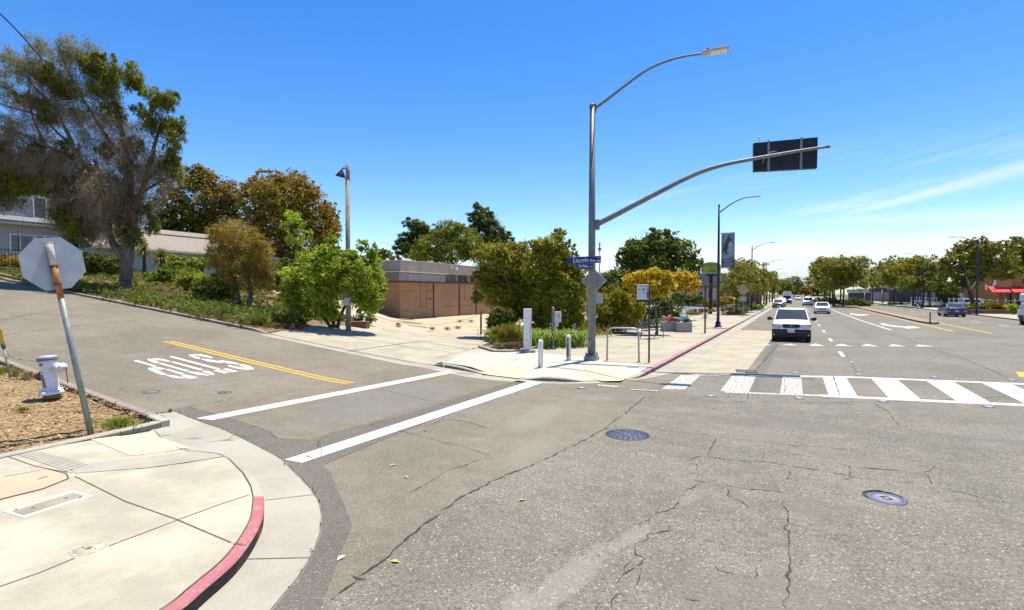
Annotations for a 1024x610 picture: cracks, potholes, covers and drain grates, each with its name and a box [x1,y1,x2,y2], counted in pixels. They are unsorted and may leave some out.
manhole cover [69,541,109,556]
manhole cover [605,429,650,441]
crack [596,422,1006,608]
manhole cover [866,492,907,505]
